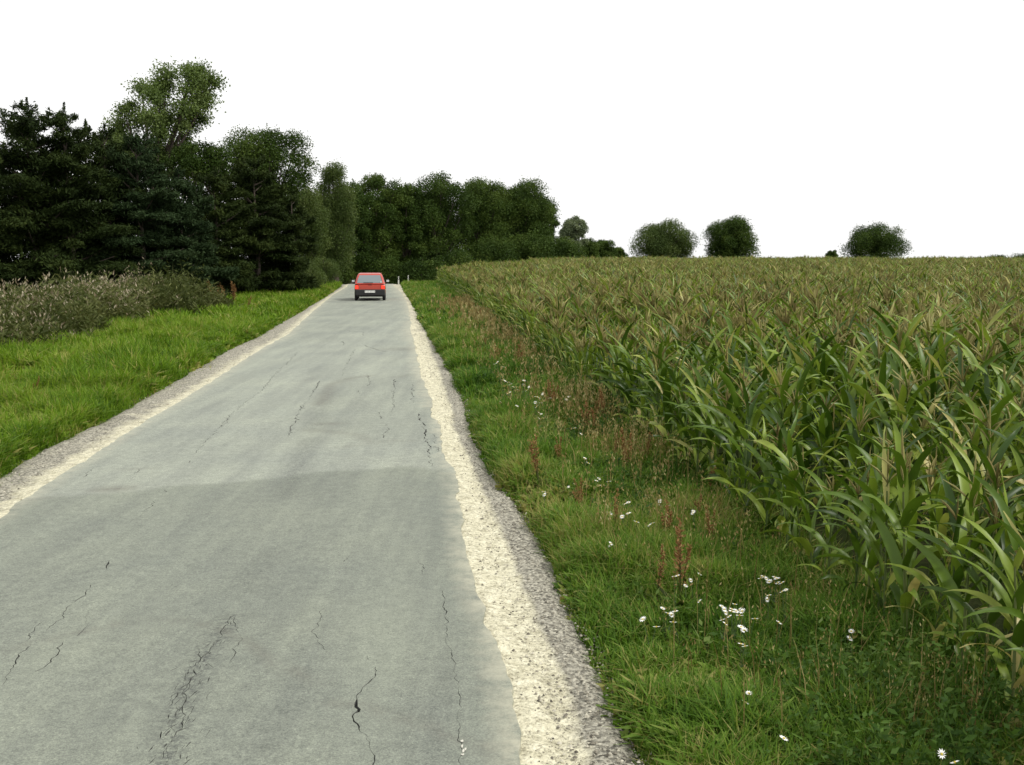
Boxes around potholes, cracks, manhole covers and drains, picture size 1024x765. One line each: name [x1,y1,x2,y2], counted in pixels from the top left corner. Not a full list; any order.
crack [137,615,243,765]
crack [378,379,439,465]
crack [442,591,463,763]
crack [352,656,377,765]
crack [4,585,91,683]
